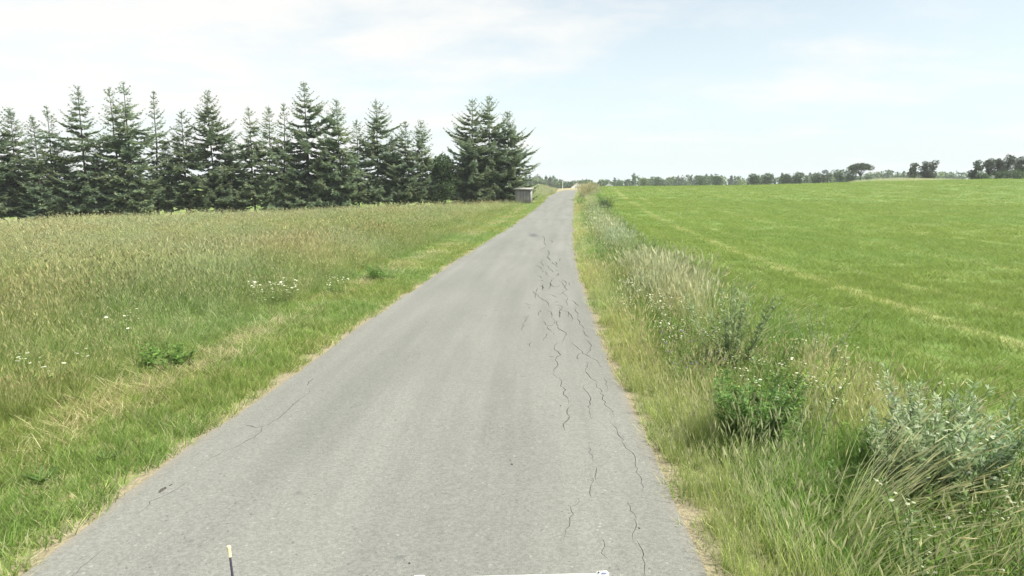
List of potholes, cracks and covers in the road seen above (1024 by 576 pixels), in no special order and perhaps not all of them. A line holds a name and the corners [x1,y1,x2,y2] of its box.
crack [521,239,645,574]
crack [199,379,313,467]
